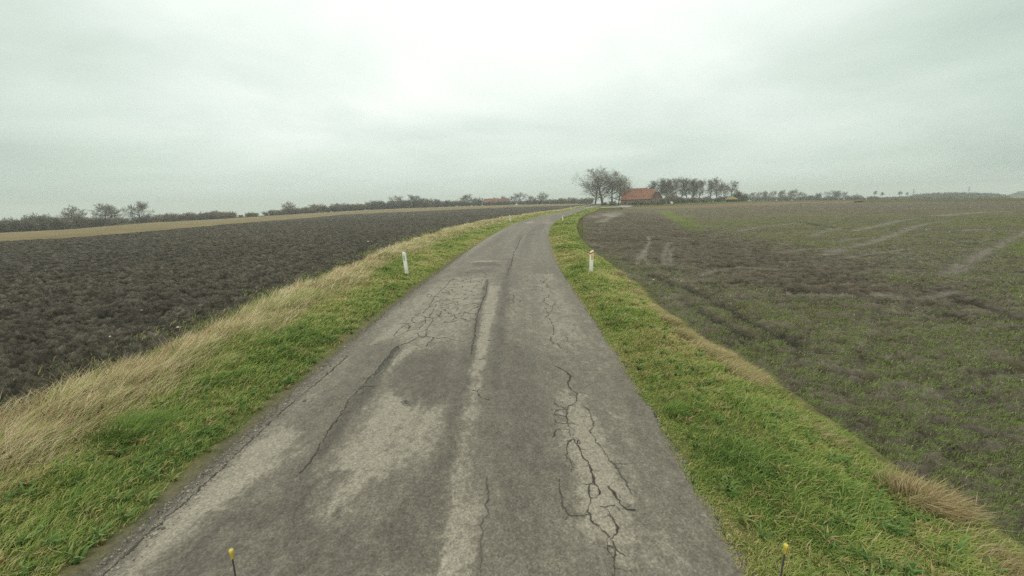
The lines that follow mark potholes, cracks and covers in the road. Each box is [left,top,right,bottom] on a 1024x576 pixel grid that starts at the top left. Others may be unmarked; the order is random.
crack [479,477,489,576]
crack [102,356,377,576]
crack [550,366,636,576]
crack [394,271,487,346]
